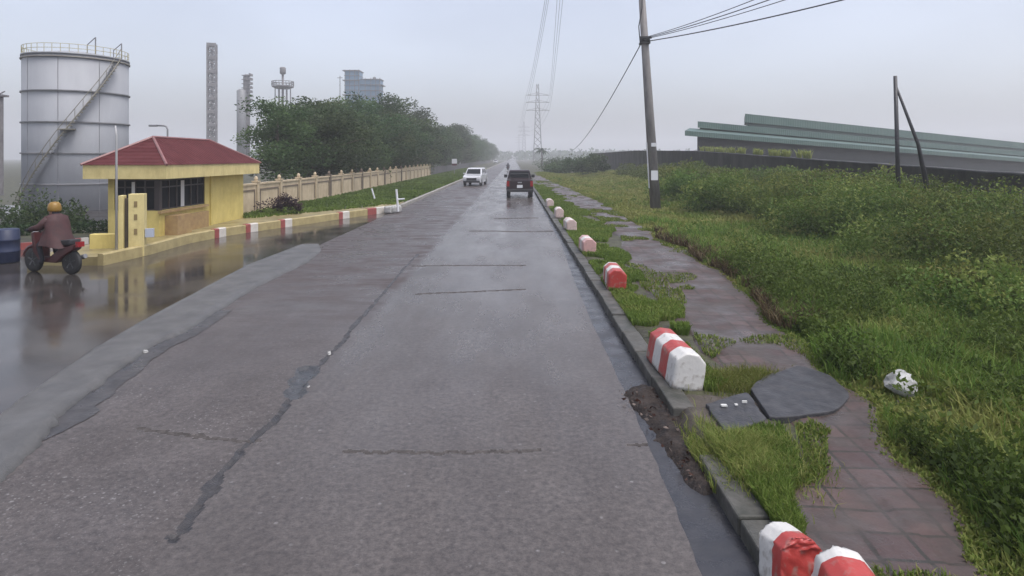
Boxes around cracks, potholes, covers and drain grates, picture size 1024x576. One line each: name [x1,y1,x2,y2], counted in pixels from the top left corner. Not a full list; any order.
crack [137,427,262,443]
